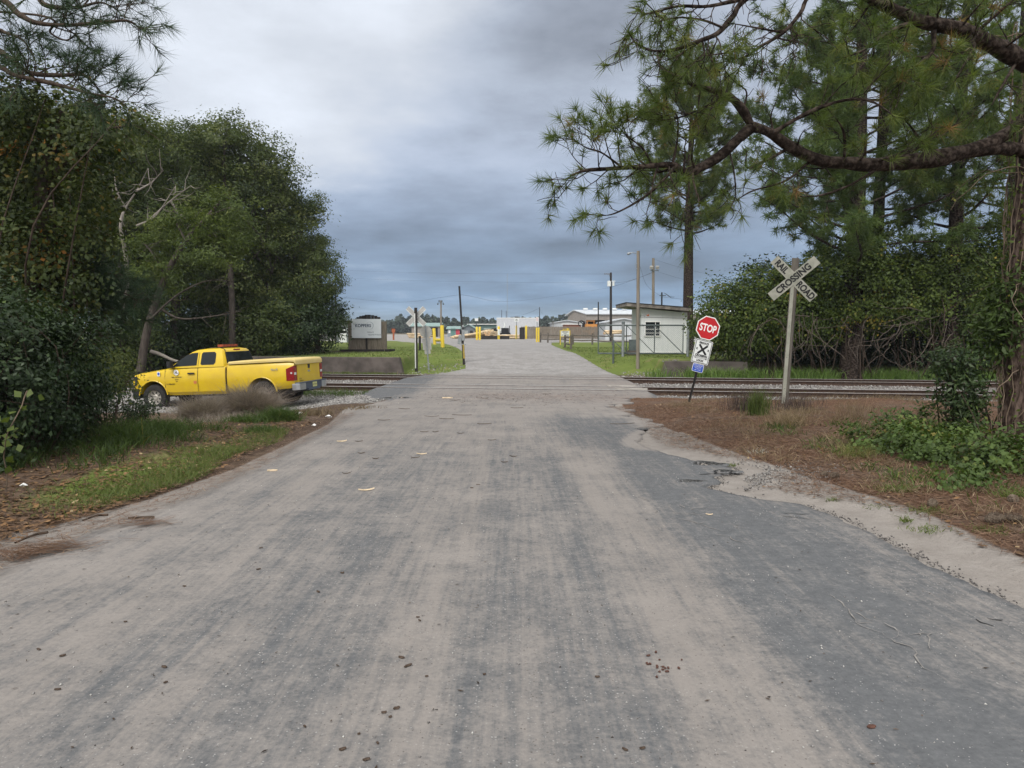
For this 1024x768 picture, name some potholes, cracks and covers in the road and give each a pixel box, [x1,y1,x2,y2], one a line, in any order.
crack [831,595,947,680]
